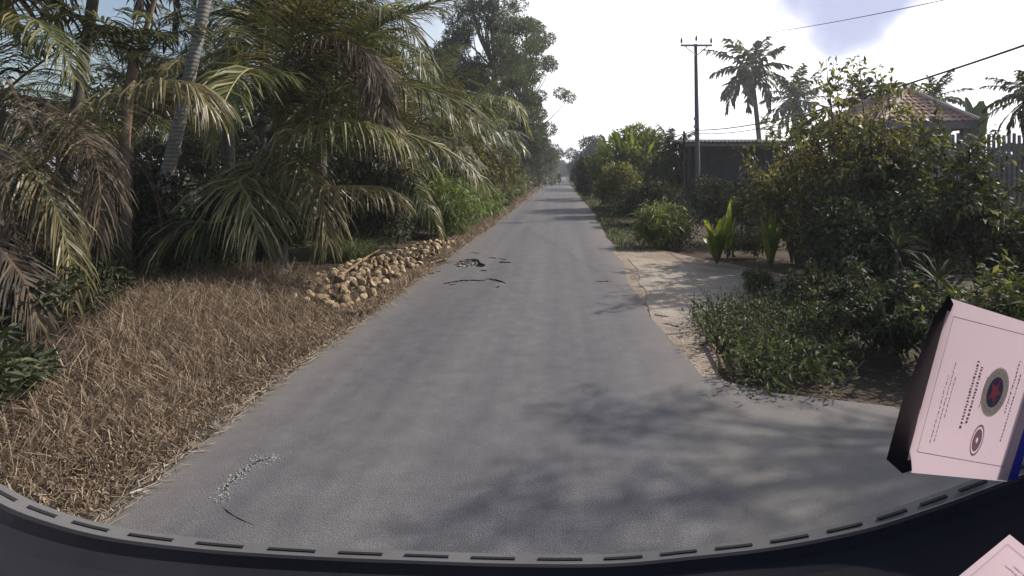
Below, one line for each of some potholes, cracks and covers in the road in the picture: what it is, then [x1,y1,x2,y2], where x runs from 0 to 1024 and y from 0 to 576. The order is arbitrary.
crack [430,257,511,288]
crack [209,451,286,525]
pothole [454,259,485,268]
